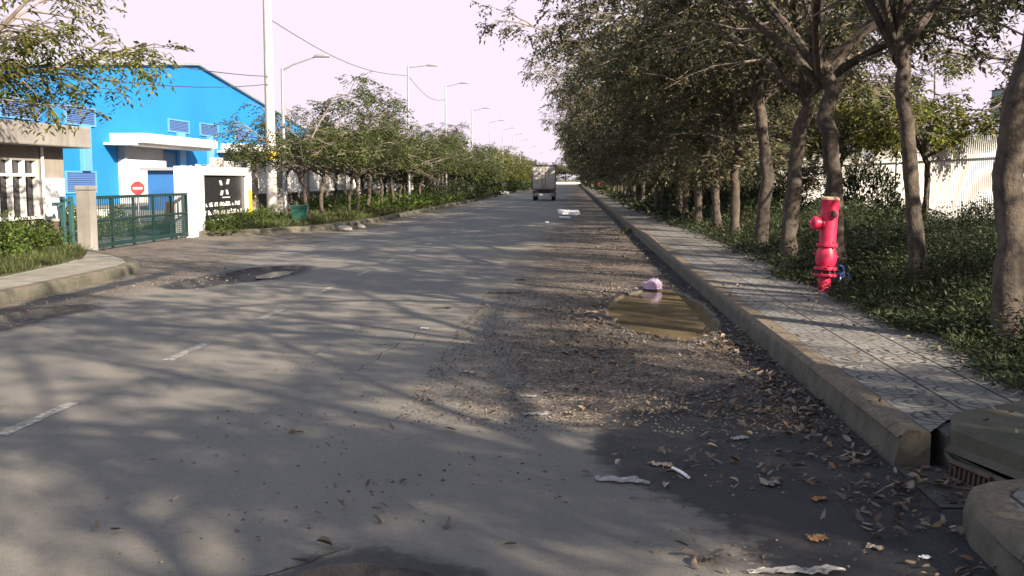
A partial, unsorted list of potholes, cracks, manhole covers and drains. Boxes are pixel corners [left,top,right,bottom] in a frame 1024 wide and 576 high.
pothole [168,266,307,289]
pothole [601,289,726,341]
drain grate [930,400,1024,488]
